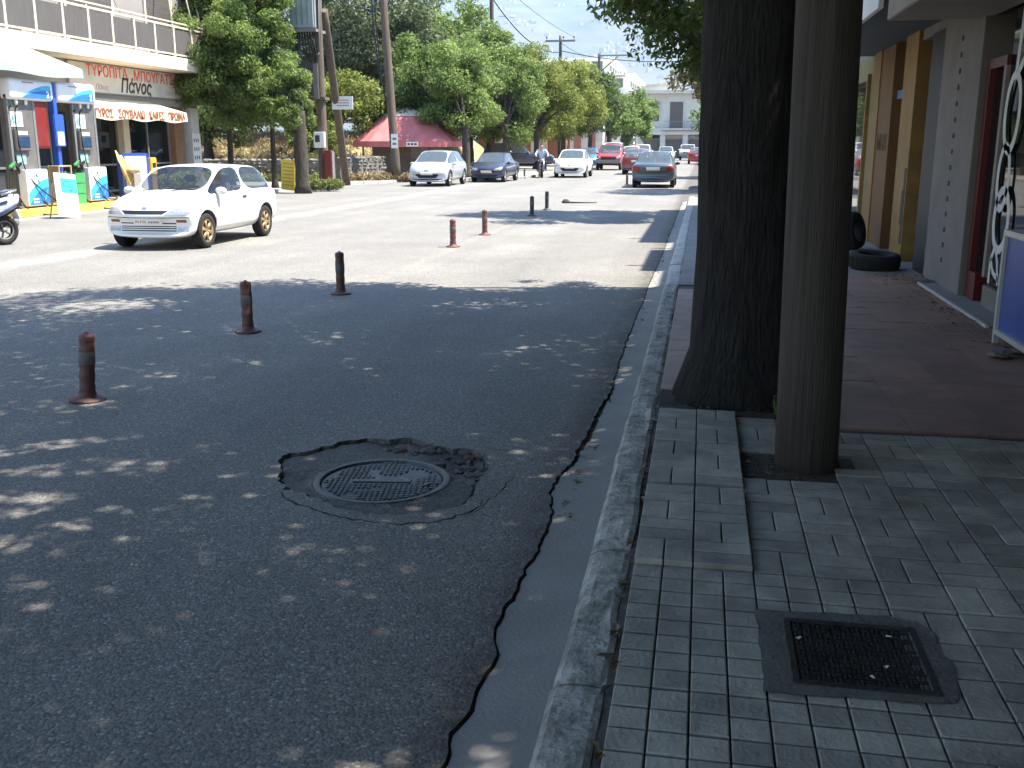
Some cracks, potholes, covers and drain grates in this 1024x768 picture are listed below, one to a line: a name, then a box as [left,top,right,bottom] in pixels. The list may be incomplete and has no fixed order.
manhole cover [312,459,451,504]
crack [280,203,682,768]
